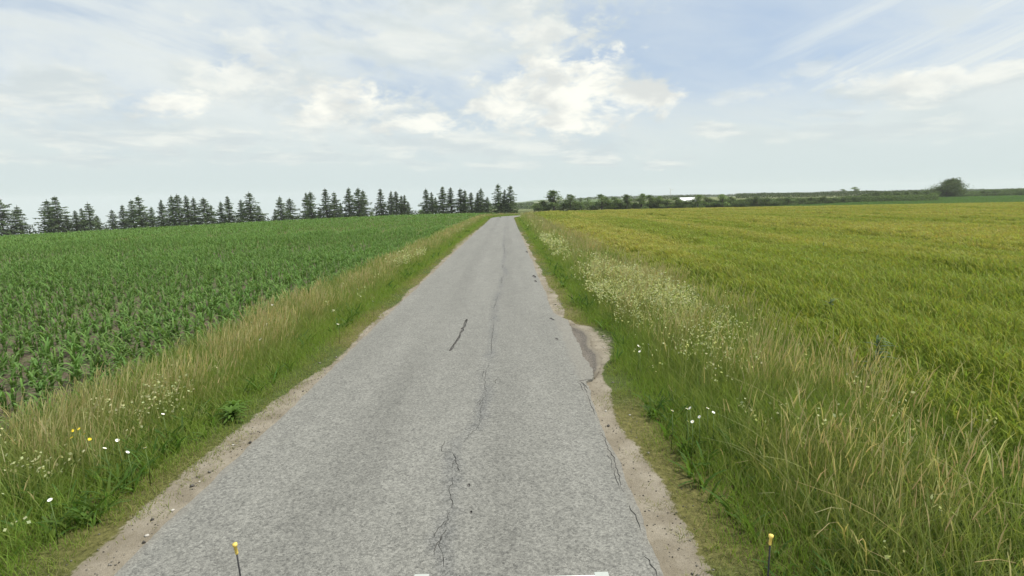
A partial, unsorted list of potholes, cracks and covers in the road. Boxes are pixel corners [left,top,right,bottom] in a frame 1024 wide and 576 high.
pothole [570,324,601,380]
crack [434,253,505,567]
crack [580,379,641,530]
